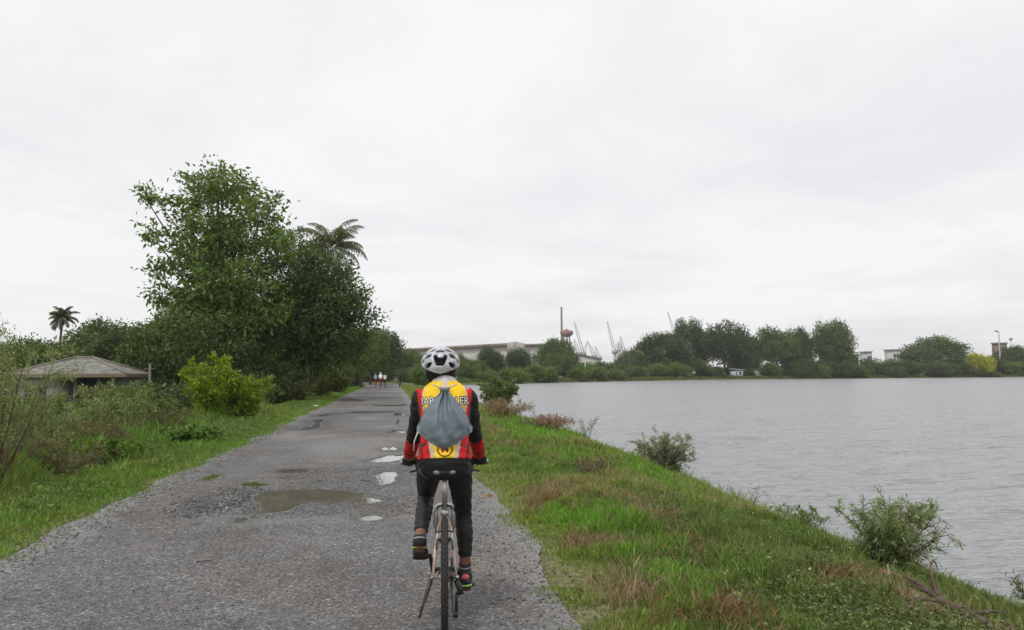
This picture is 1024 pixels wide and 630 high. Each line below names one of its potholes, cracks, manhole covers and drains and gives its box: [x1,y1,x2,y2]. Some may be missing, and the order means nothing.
pothole [238,487,387,515]
pothole [300,419,325,430]
pothole [368,471,400,486]
pothole [353,513,388,521]
pothole [367,454,404,463]
pothole [199,473,224,481]
